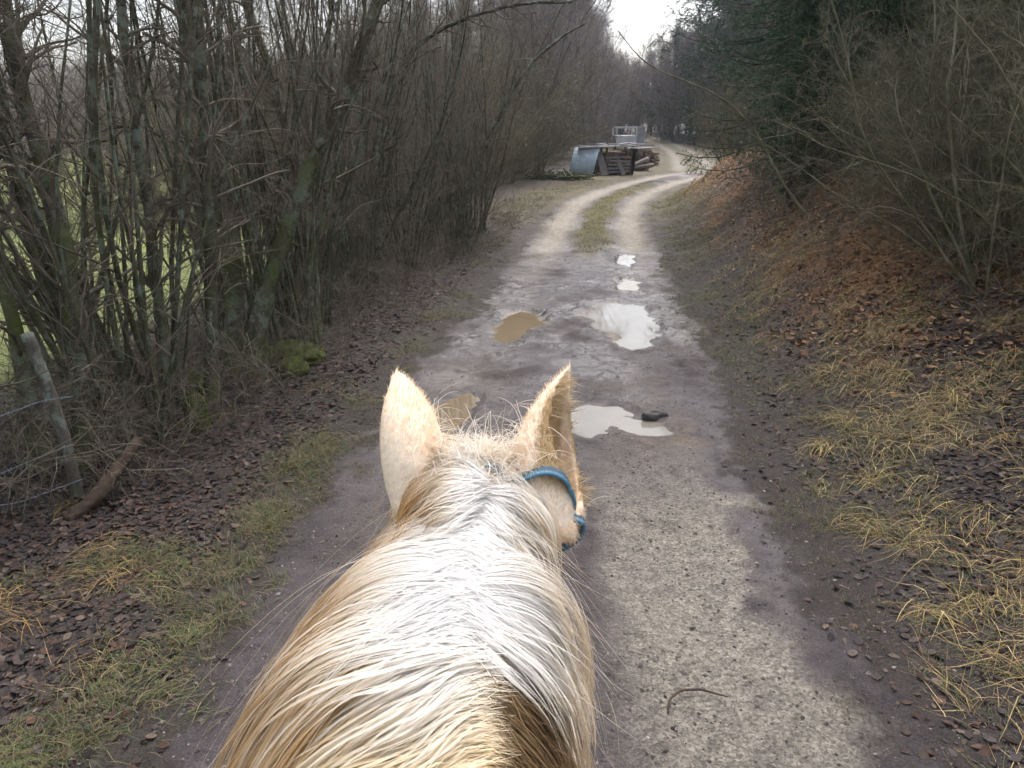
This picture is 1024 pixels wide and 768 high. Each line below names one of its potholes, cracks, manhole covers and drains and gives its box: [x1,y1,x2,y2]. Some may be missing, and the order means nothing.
pothole [570,299,668,351]
pothole [613,252,638,267]
pothole [429,387,486,434]
pothole [570,398,676,438]
pothole [612,276,646,291]
pothole [482,306,558,344]
